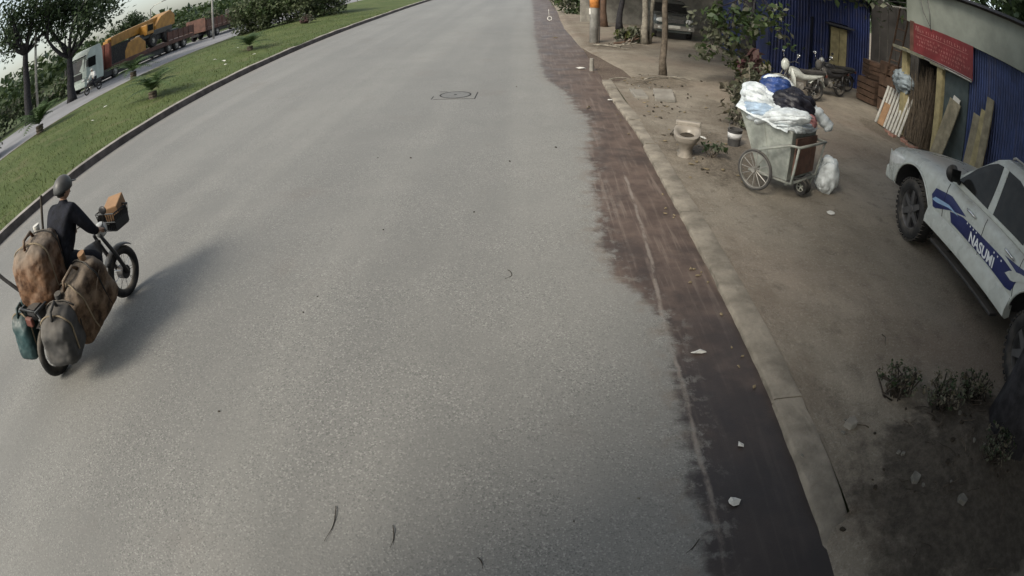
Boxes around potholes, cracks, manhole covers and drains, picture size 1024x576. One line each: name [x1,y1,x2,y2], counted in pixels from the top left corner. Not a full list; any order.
manhole cover [431,91,478,100]
